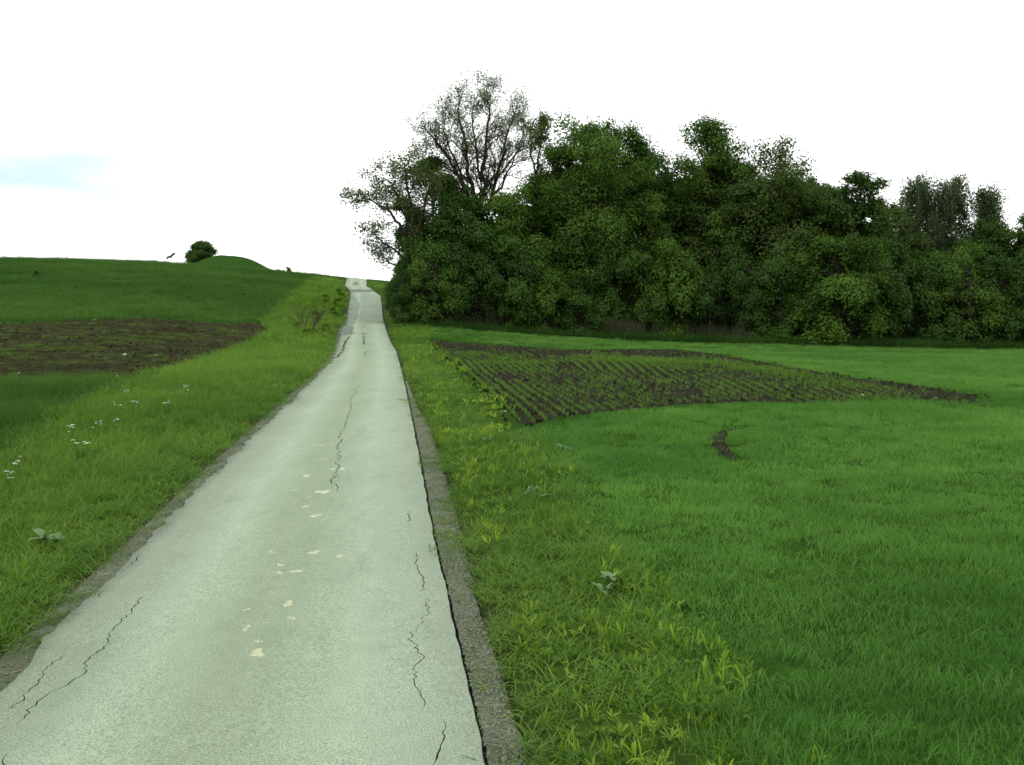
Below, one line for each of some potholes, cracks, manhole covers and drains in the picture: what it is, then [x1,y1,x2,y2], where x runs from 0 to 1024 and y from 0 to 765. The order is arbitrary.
crack [330,385,361,490]
crack [383,317,488,765]
crack [10,596,143,725]
crack [332,336,368,359]
